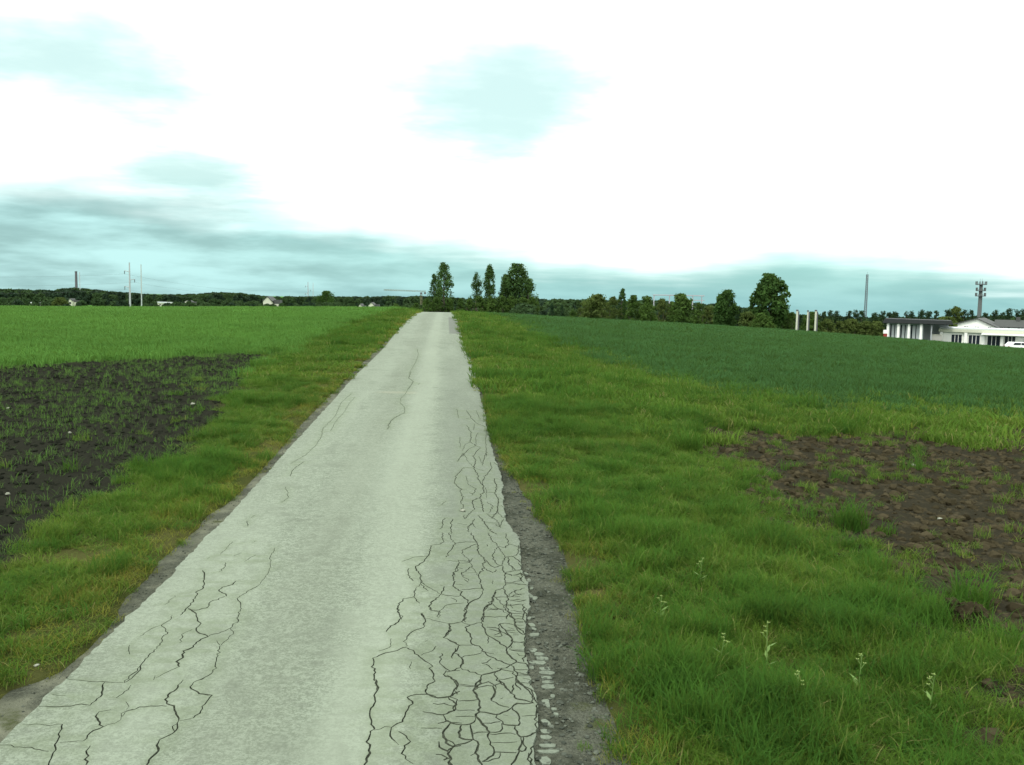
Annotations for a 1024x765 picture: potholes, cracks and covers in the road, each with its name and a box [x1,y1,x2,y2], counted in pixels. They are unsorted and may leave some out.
crack [11,541,275,765]
crack [282,400,349,502]
crack [364,411,538,765]
